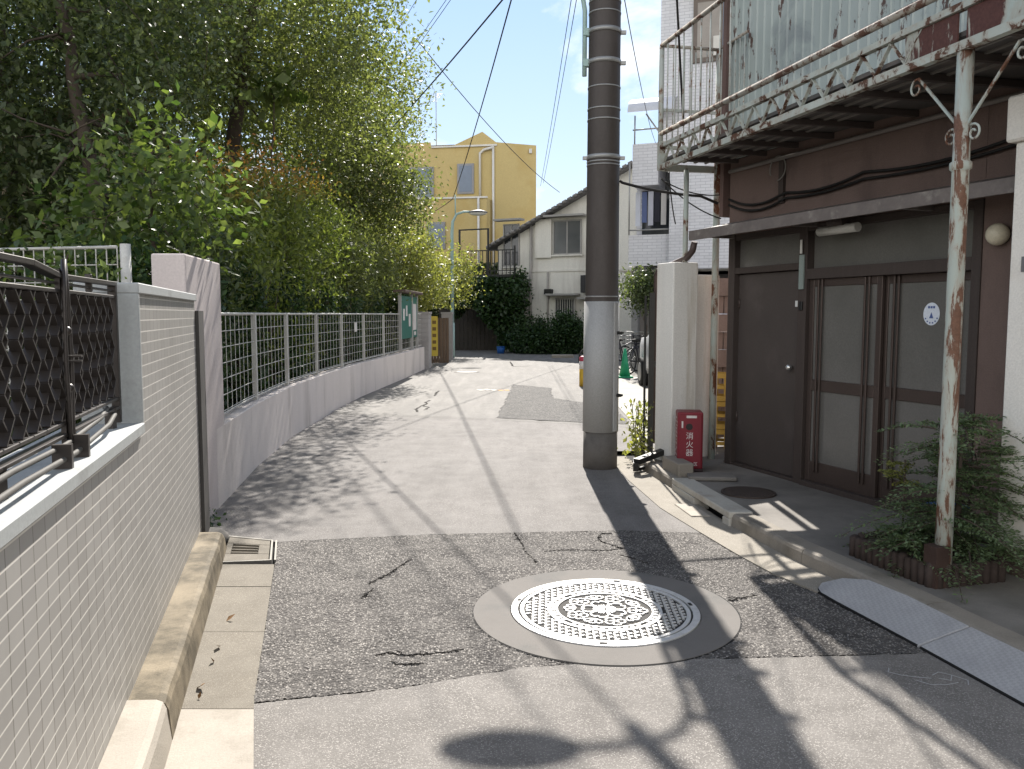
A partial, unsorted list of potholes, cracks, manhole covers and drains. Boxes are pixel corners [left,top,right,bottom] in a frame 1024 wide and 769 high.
crack [375,649,463,665]
crack [514,532,649,565]
crack [361,559,412,599]
manhole cover [721,486,776,499]
manhole cover [472,569,742,667]
